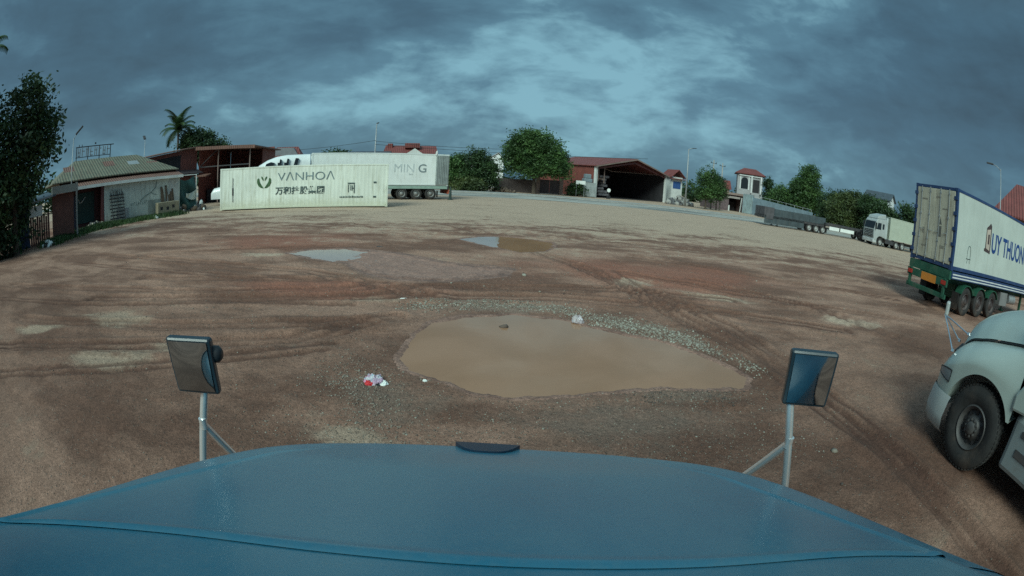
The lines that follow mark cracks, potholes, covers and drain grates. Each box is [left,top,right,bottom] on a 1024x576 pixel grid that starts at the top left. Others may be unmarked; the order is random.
pothole [393,313,753,401]
pothole [455,236,557,253]
pothole [284,248,515,282]
